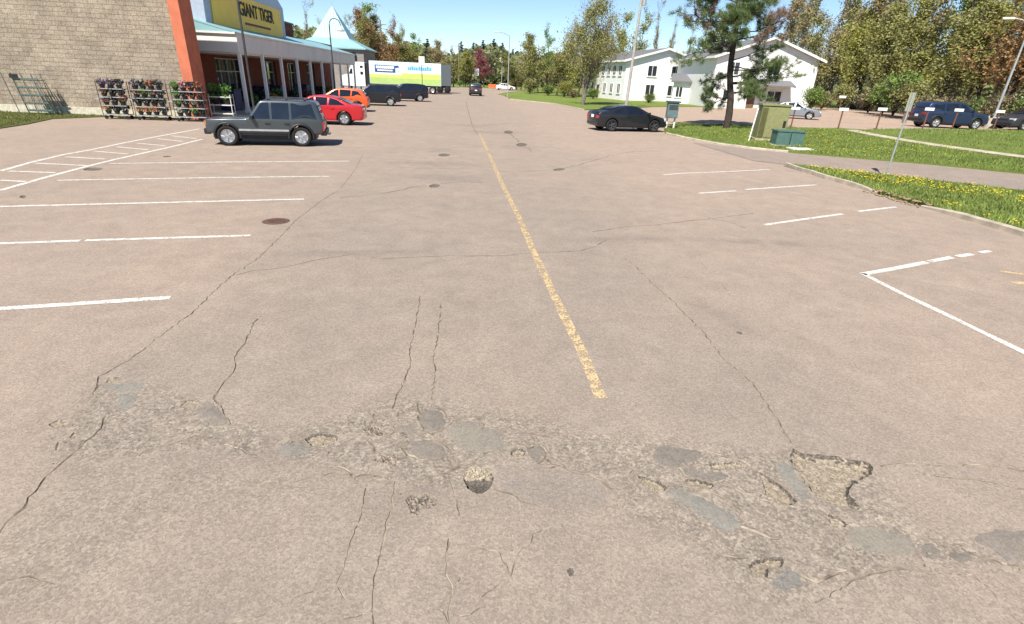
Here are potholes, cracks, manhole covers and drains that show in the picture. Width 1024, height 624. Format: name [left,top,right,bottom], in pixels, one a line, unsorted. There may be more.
crack [237,213,1024,624]
pothole [790,448,874,510]
pothole [463,466,494,494]
crack [132,296,613,624]
pothole [305,433,338,448]
pothole [749,557,784,578]
